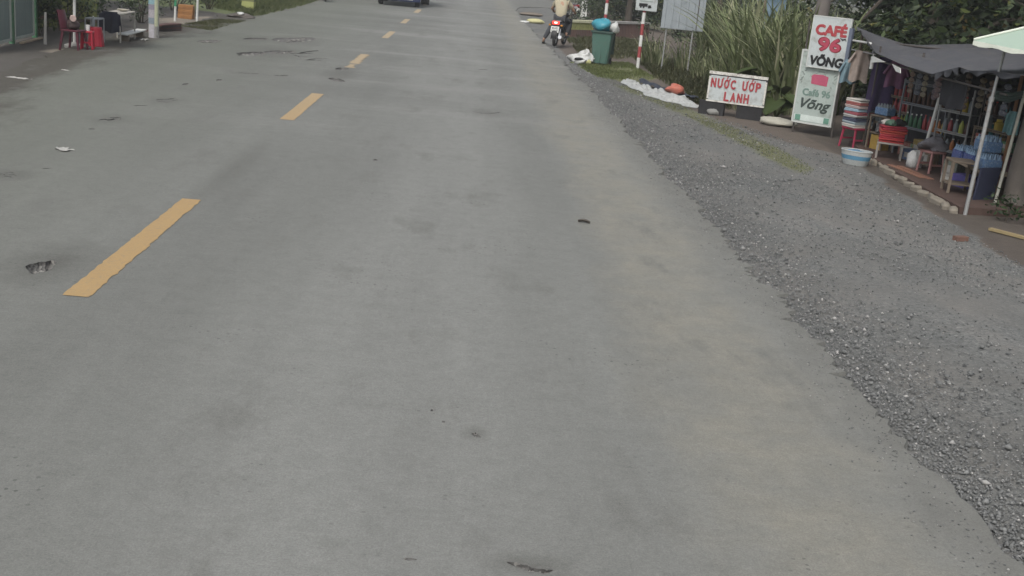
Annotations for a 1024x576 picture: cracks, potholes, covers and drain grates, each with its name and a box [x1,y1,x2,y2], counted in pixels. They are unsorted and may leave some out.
pothole [25,260,57,274]
pothole [507,562,553,574]
